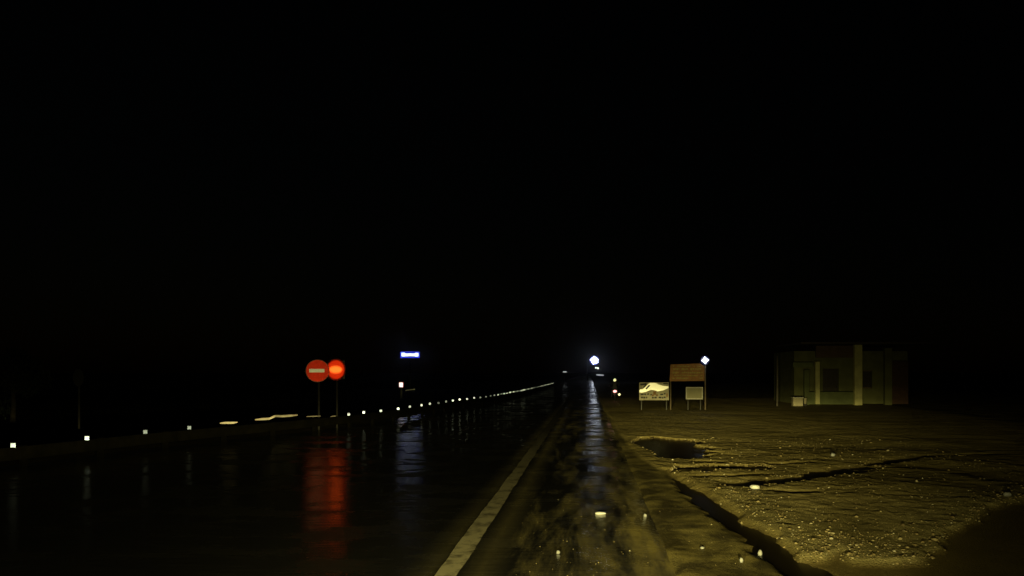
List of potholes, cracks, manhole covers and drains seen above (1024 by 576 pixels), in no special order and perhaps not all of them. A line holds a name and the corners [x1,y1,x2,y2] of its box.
pothole [633,436,718,459]
